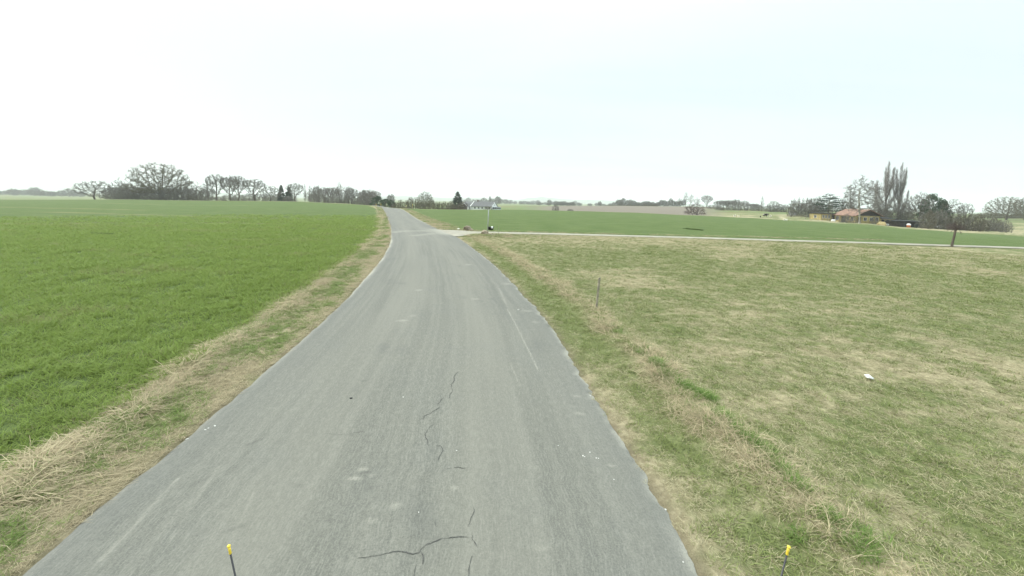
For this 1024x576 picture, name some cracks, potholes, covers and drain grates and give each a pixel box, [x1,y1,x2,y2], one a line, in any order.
crack [359,510,477,576]
crack [422,372,468,469]
